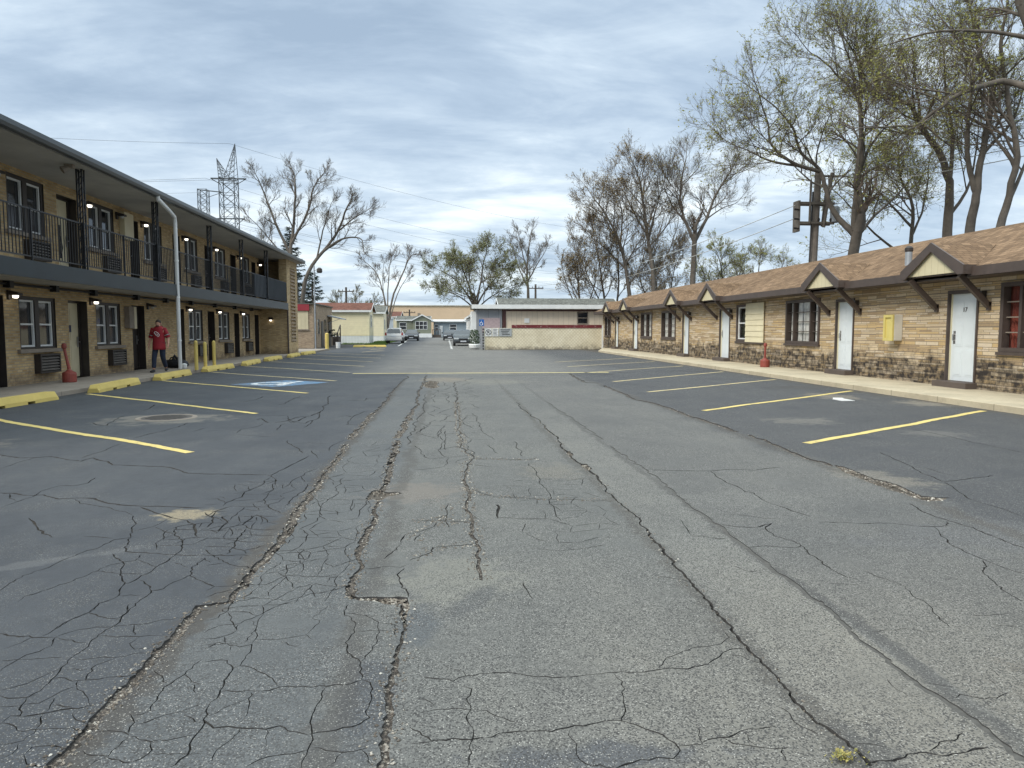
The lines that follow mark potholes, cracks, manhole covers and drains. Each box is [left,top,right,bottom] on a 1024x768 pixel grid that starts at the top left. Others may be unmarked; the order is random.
crack [857,733,988,763]
crack [880,452,1021,516]
crack [369,378,617,597]
crack [667,467,1024,699]
crack [410,633,817,768]
crack [0,396,403,768]
manhole cover [135,414,198,422]
